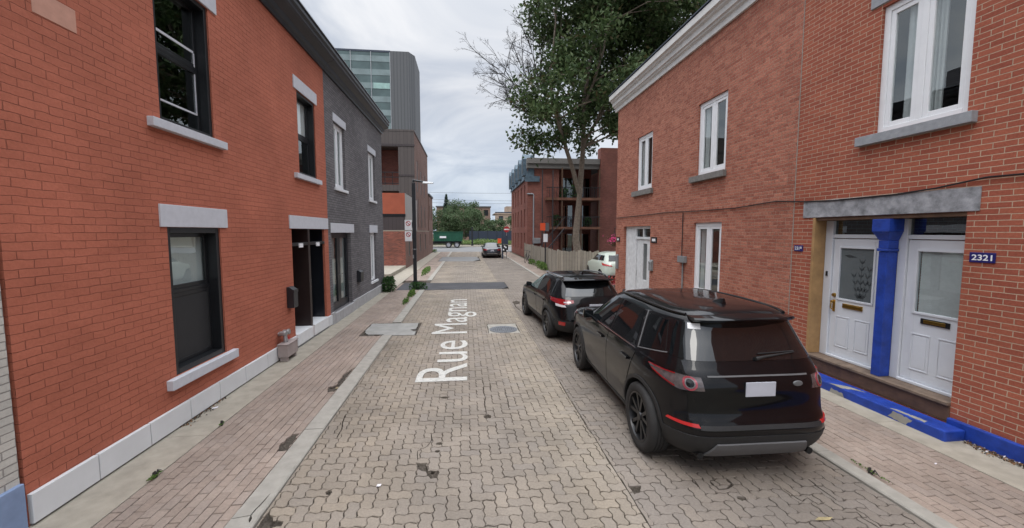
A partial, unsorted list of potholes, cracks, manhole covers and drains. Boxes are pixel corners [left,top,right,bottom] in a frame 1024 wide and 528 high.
manhole cover [487,324,520,334]
pothole [417,464,439,479]
pothole [278,435,298,451]
